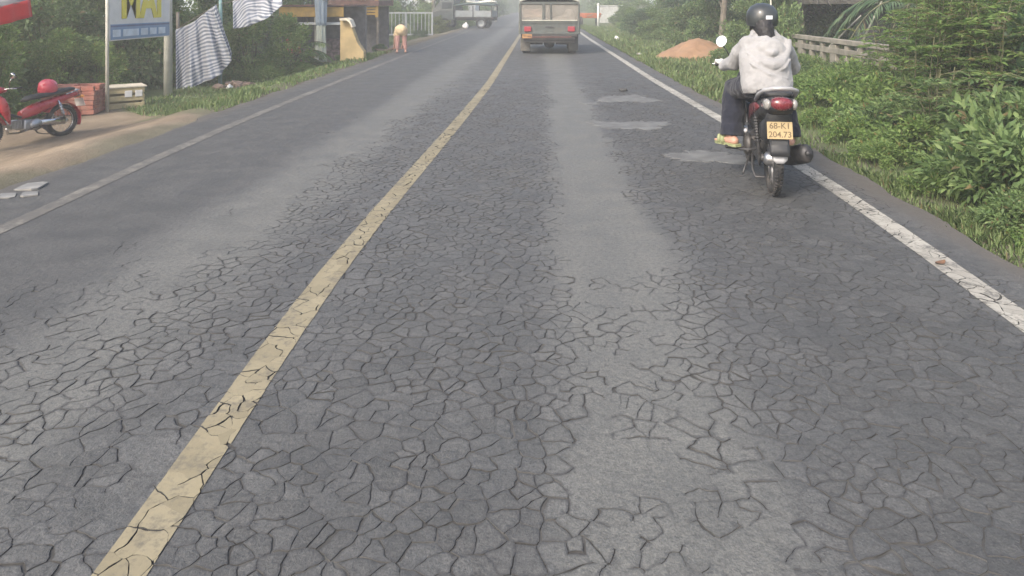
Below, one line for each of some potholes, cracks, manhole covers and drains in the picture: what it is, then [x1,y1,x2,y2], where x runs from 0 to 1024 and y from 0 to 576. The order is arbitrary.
crack [0,68,493,576]
crack [128,67,1024,576]
